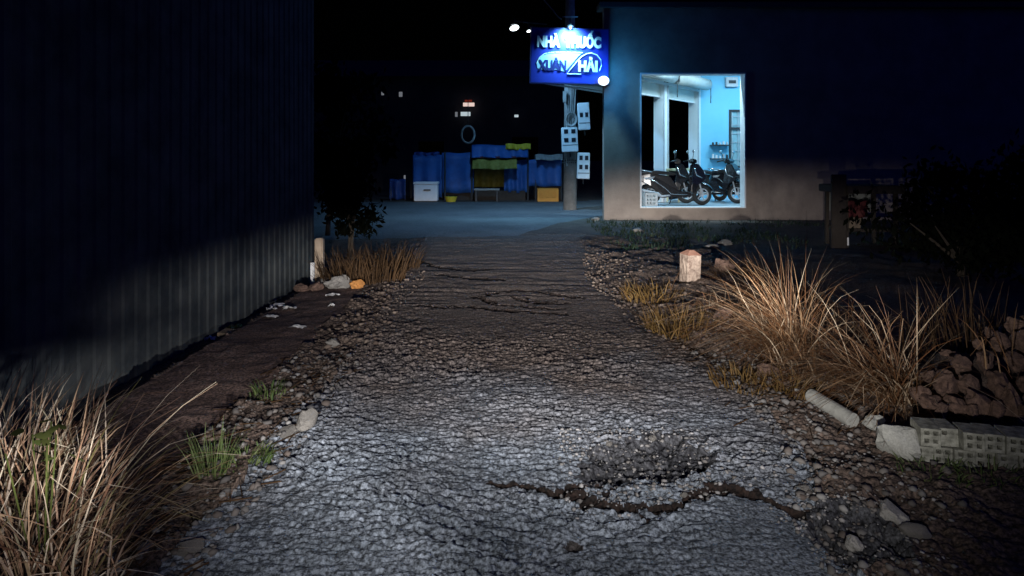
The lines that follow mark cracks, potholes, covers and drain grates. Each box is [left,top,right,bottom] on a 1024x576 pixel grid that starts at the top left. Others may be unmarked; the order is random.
pothole [573,430,718,488]
crack [415,260,586,316]
crack [486,480,810,524]
